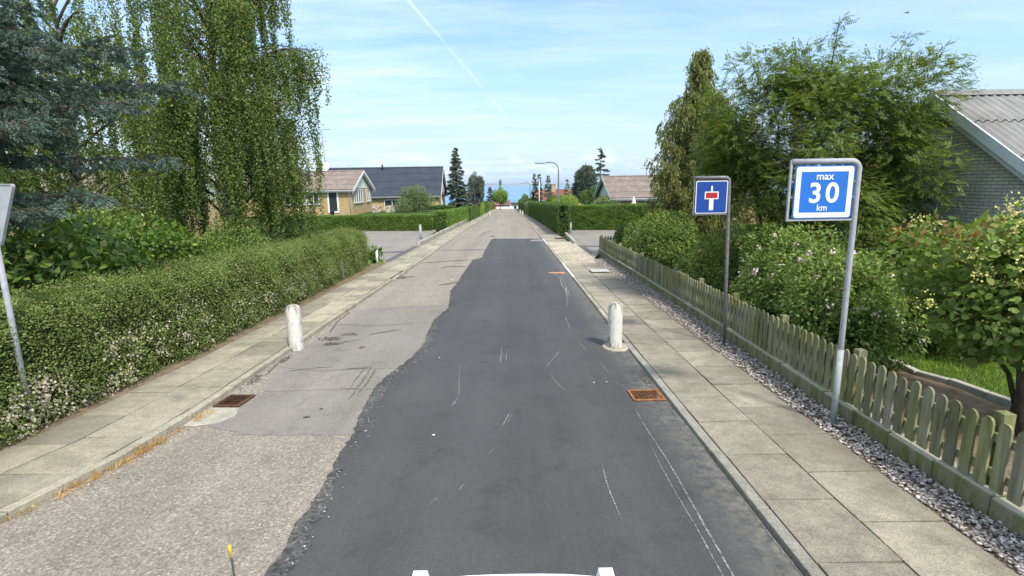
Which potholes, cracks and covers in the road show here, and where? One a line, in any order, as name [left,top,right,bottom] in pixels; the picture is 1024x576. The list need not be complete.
drain grate [213,394,256,407]
drain grate [627,389,666,402]
